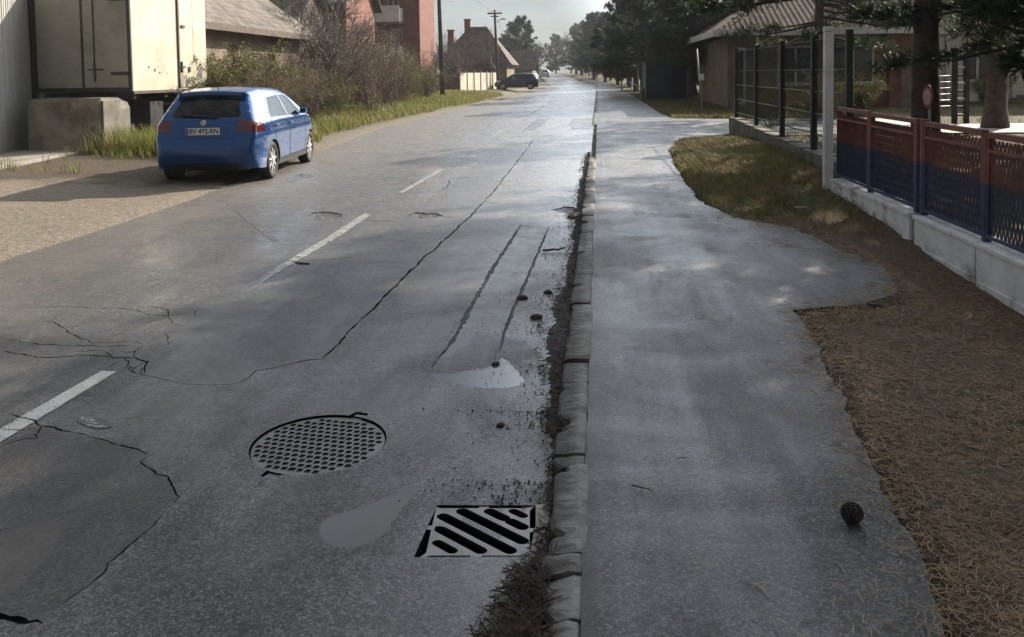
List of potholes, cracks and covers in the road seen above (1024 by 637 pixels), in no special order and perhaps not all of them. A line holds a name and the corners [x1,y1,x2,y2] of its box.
crack [0,613,43,624]
crack [0,411,180,601]
manhole cover [249,414,386,479]
crack [4,137,549,385]
drain grate [414,505,550,557]
